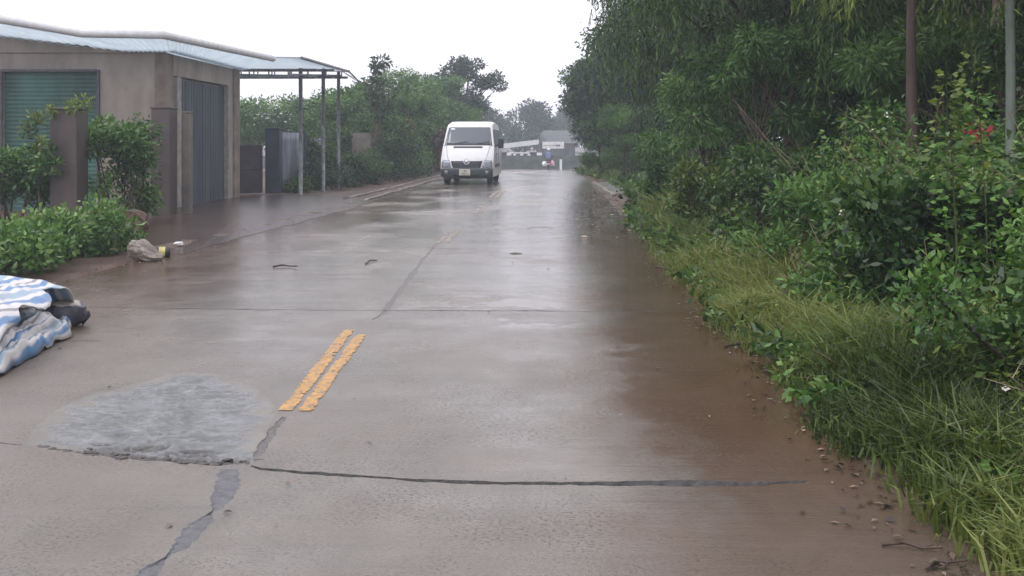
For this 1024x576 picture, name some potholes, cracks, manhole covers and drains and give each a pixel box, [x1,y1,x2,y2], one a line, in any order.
crack [136,465,810,576]
